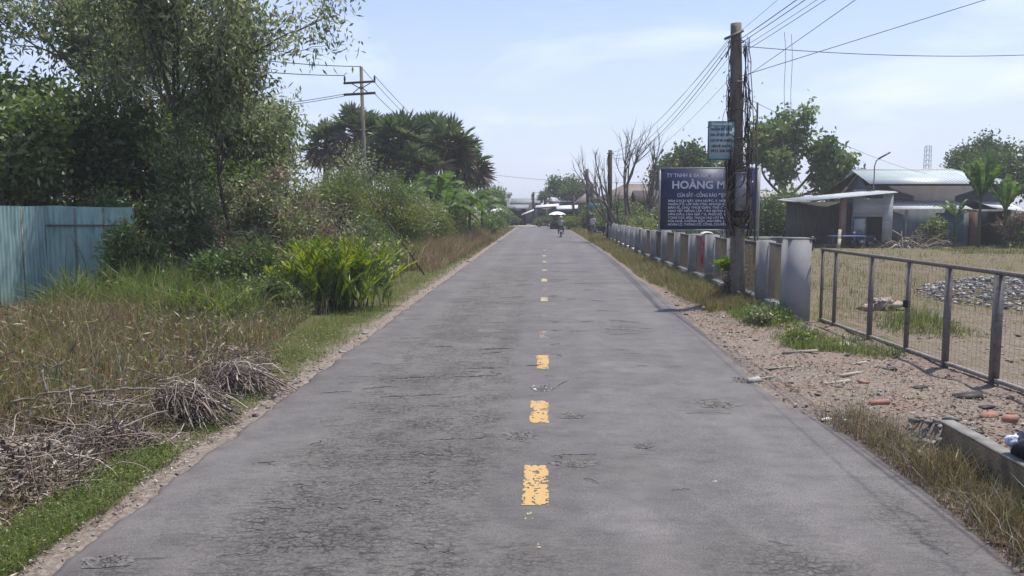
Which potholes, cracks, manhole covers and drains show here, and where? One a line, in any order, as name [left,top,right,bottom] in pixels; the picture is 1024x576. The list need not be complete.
pothole [529,384,556,392]
pothole [81,553,135,569]
crack [252,247,653,465]
crack [406,542,457,555]
pothole [558,411,585,419]
pothole [500,430,538,442]
